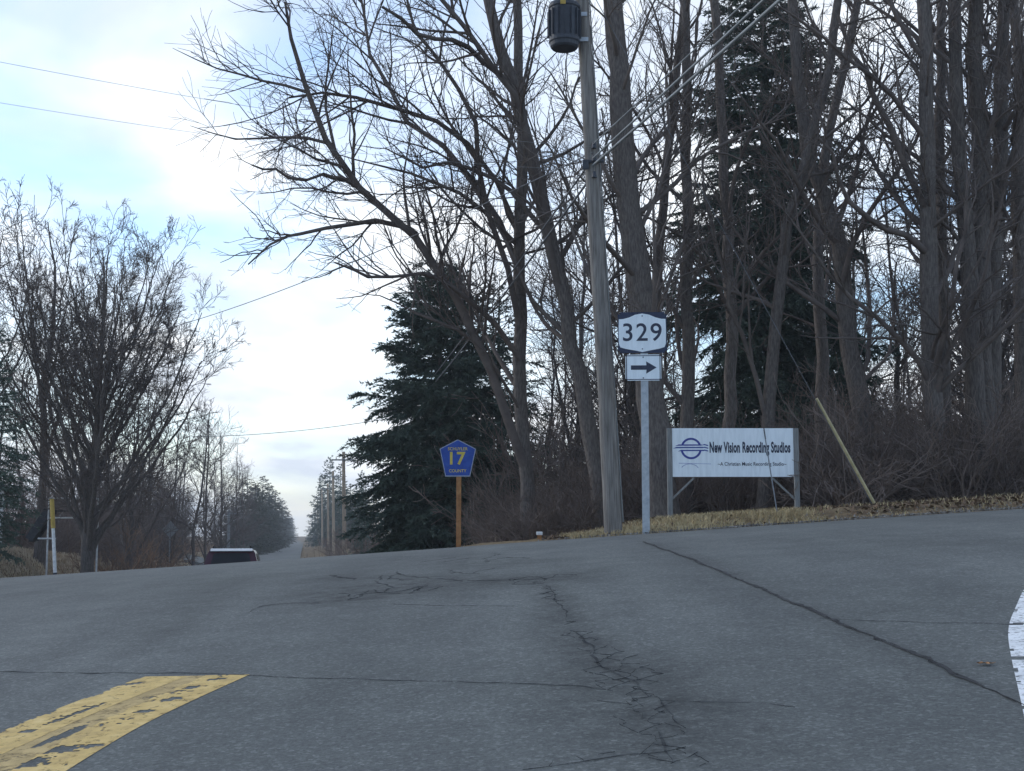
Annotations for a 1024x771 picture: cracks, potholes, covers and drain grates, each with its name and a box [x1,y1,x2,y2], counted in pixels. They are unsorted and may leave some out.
crack [0,592,709,769]
crack [336,557,572,600]
